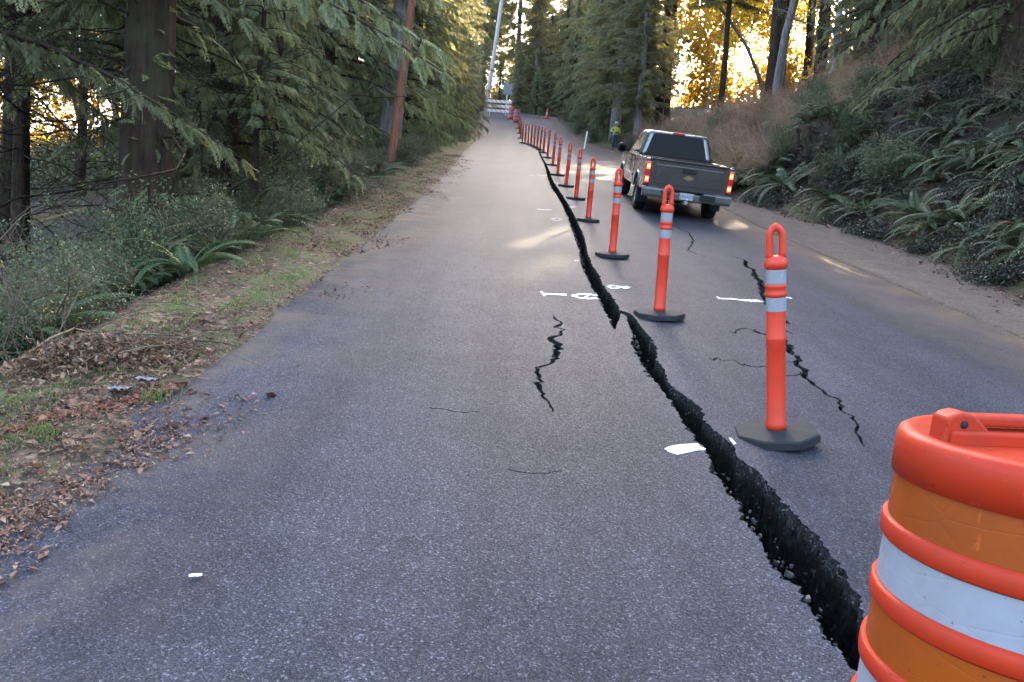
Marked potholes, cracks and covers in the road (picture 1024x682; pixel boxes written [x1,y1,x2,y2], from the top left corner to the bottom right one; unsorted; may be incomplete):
crack [508,150,864,671]
